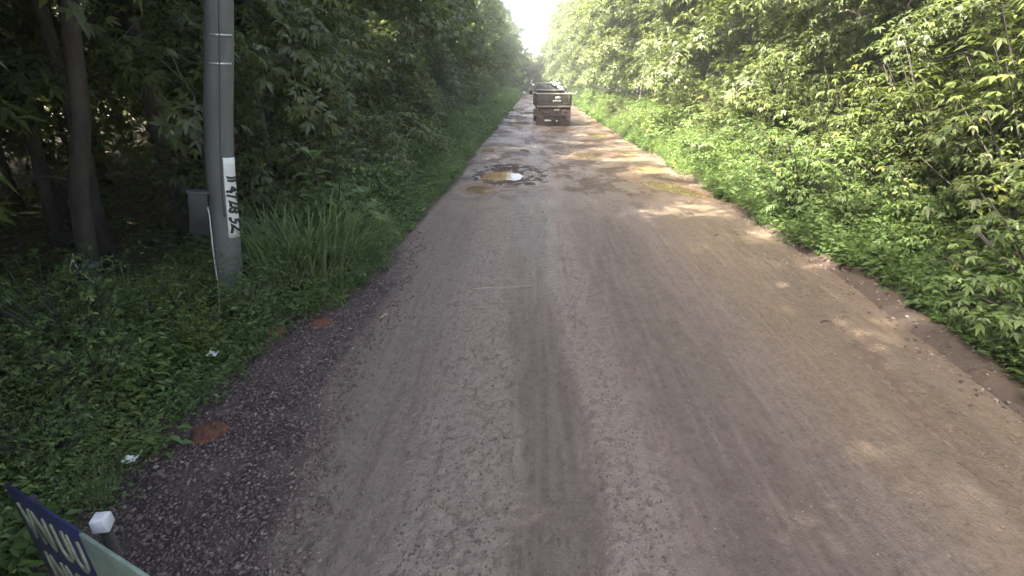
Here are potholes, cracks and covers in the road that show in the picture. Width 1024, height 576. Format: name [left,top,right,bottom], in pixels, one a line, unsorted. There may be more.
pothole [472,163,550,186]
pothole [458,183,497,196]
